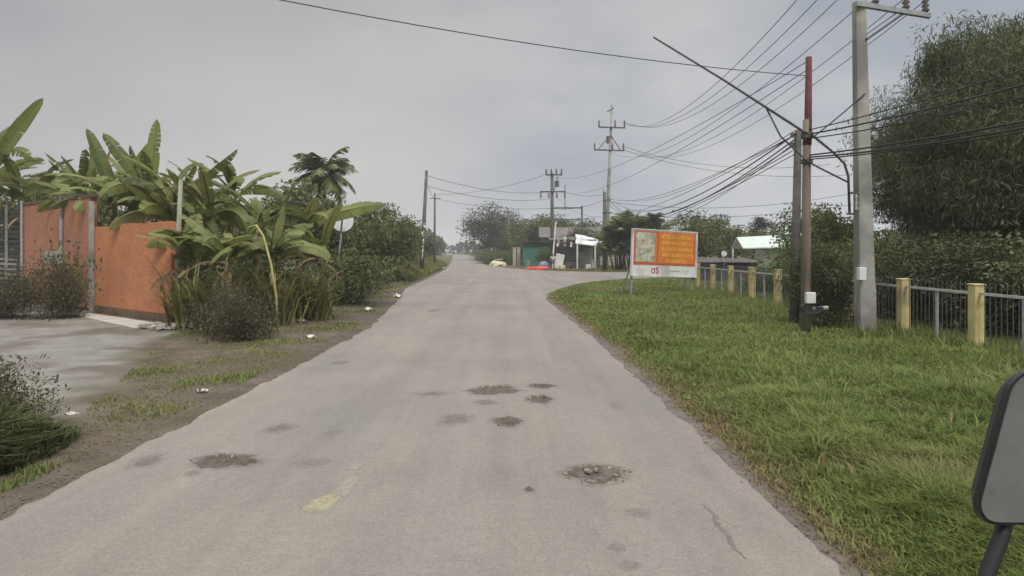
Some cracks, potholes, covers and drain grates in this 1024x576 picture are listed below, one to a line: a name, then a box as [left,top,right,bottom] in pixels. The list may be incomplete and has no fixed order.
pothole [186,452,267,471]
pothole [555,462,635,487]
crack [703,504,746,559]
pothole [459,383,528,396]
pothole [488,415,526,428]
pothole [523,394,555,405]
